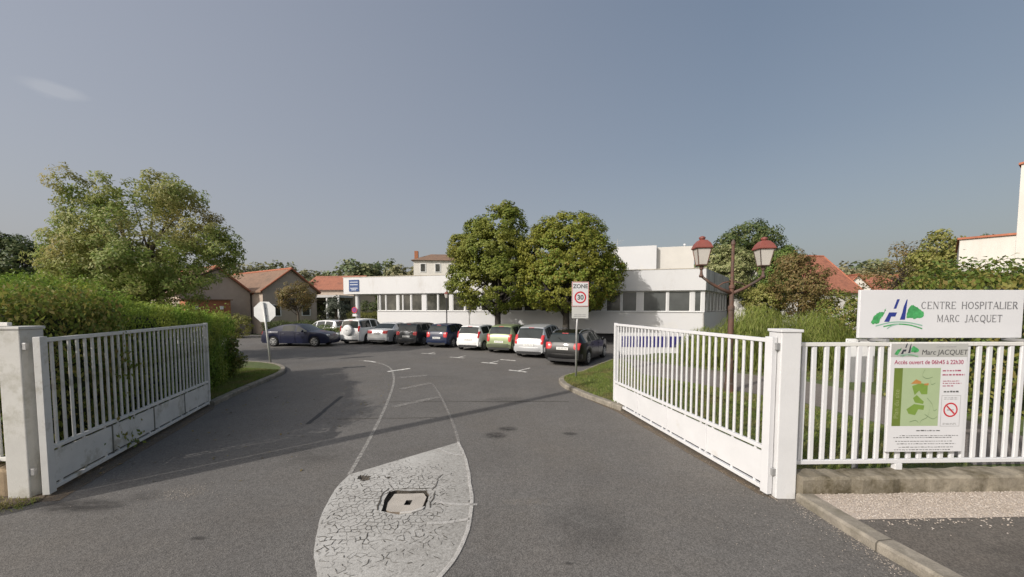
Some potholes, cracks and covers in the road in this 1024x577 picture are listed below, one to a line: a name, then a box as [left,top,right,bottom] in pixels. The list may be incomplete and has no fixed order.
manhole cover [386,493,427,515]
crack [316,460,464,577]
